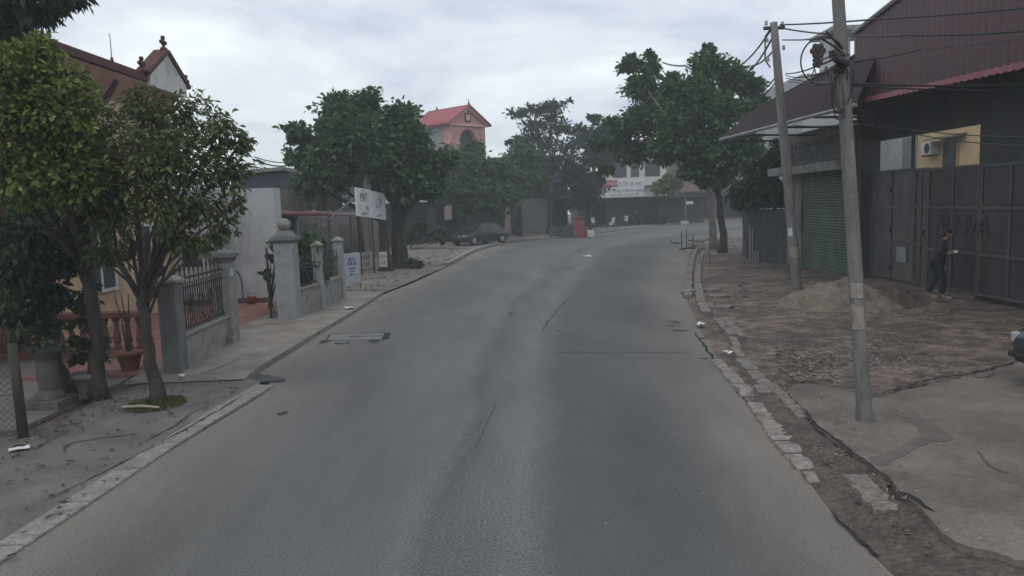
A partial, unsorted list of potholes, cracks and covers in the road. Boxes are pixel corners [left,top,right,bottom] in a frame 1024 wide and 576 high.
crack [542,297,570,332]
